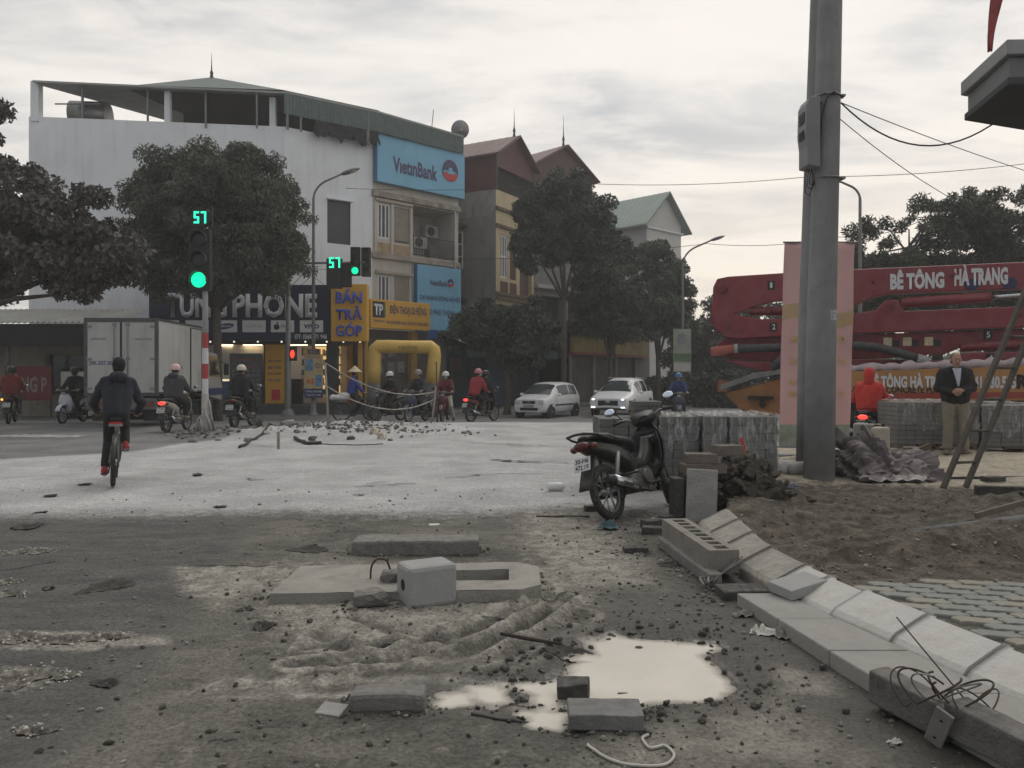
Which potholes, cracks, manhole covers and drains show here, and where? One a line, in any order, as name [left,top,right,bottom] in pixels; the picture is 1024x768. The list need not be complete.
pothole [25,633,101,648]
pothole [434,691,531,725]
pothole [0,577,25,586]
pothole [12,722,63,739]
pothole [0,661,67,695]
pothole [0,629,60,647]
pothole [78,630,137,645]
pothole [464,634,733,731]
pothole [0,588,27,598]
